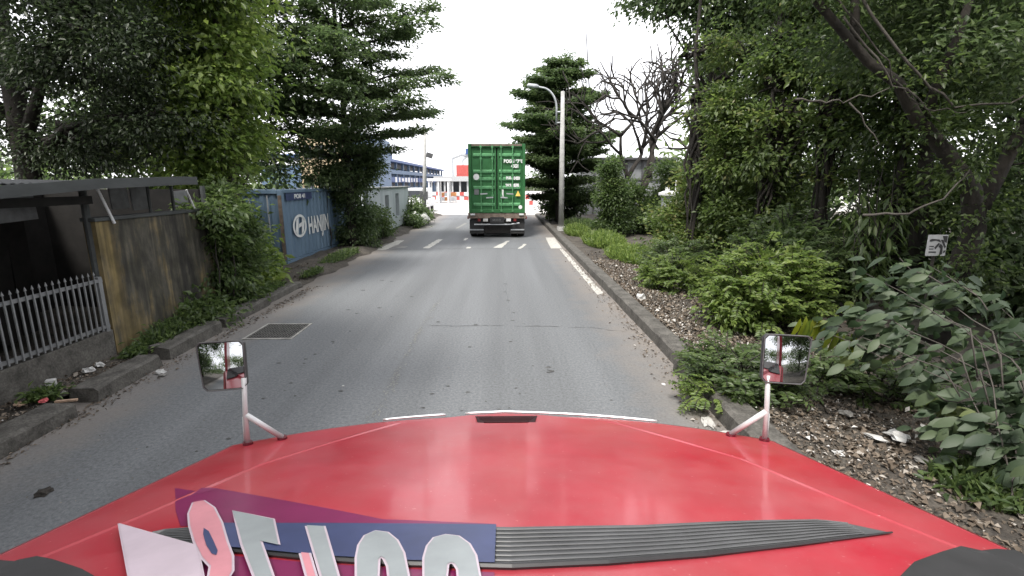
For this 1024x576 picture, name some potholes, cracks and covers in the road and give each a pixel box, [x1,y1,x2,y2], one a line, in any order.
drain grate [242,323,312,340]
